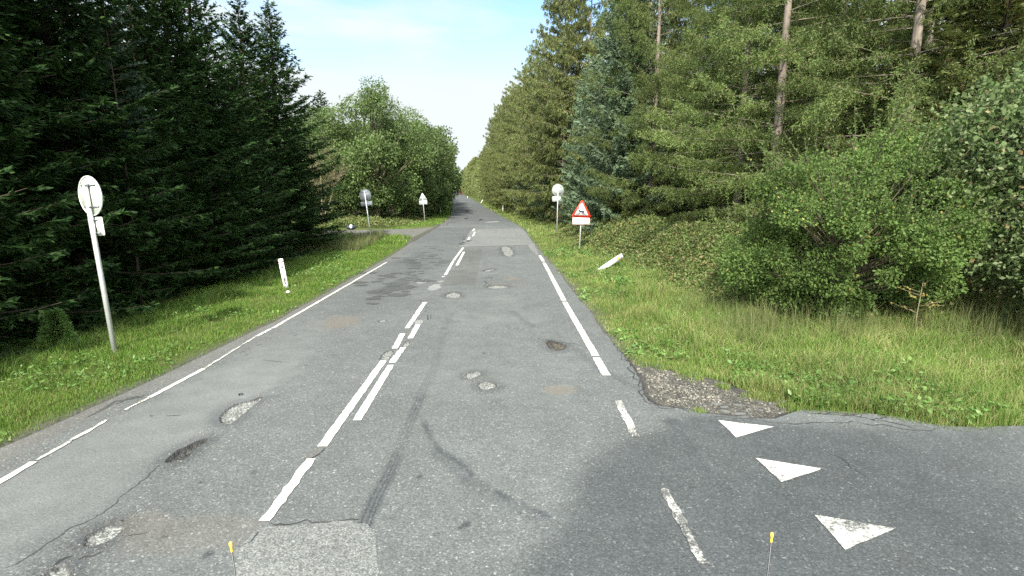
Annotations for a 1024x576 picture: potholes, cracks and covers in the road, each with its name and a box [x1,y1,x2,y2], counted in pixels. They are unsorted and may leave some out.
pothole [546,340,567,351]
pothole [500,246,514,257]
crack [53,551,103,566]
pothole [622,352,798,419]
pothole [477,381,497,390]
pothole [219,397,262,424]
pothole [165,438,208,463]
pothole [81,522,125,547]
